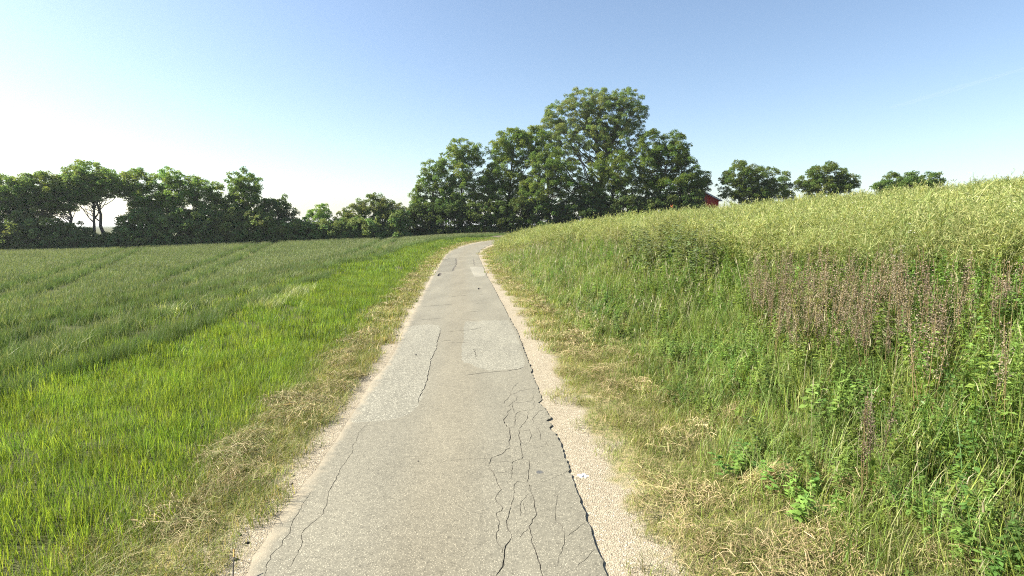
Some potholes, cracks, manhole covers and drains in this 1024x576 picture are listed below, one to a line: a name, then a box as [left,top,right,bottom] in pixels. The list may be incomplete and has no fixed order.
crack [423,295,523,375]
crack [265,417,376,573]
crack [549,471,594,567]
crack [439,388,552,576]
